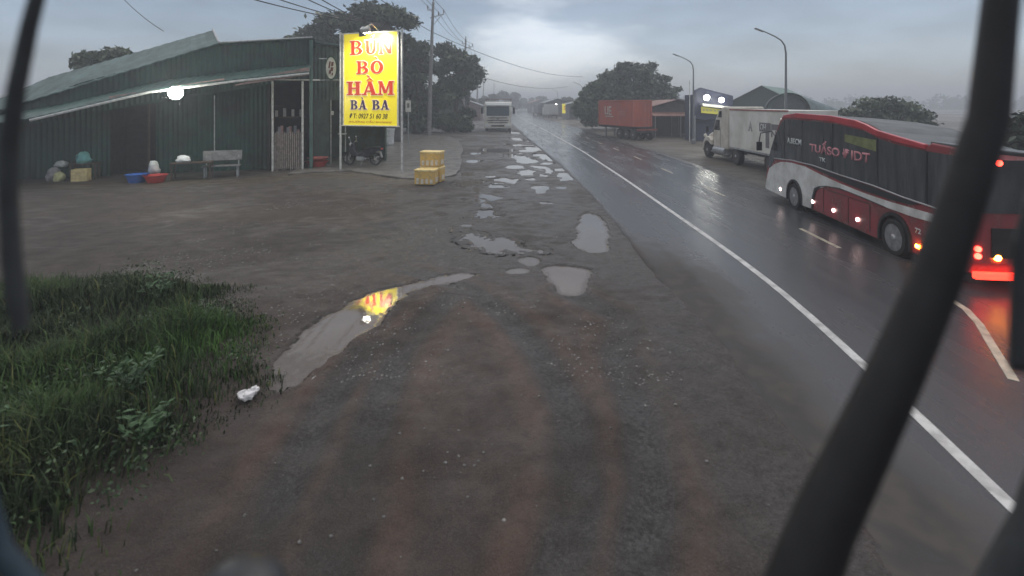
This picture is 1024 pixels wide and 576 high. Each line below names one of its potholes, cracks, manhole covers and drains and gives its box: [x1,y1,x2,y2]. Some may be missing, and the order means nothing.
pothole [514,168,546,178]
pothole [466,185,507,210]
pothole [534,261,601,301]
pothole [504,152,543,164]
pothole [255,271,482,402]
pothole [527,164,554,175]
pothole [565,210,618,255]
pothole [456,197,506,220]
pothole [490,177,526,186]
pothole [514,146,542,155]
pothole [450,227,552,257]
pothole [481,181,514,189]
